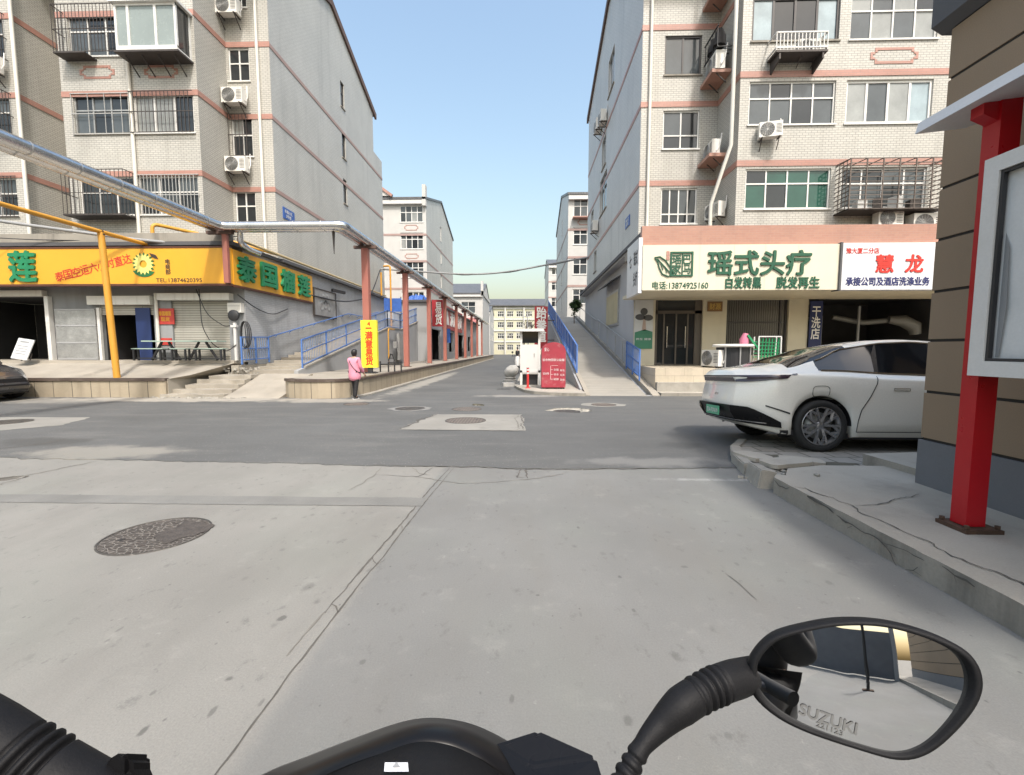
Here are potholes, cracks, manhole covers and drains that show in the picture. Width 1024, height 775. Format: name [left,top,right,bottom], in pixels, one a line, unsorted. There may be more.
crack [351,468,572,489]
crack [798,487,1024,584]
manhole cover [94,517,214,556]
